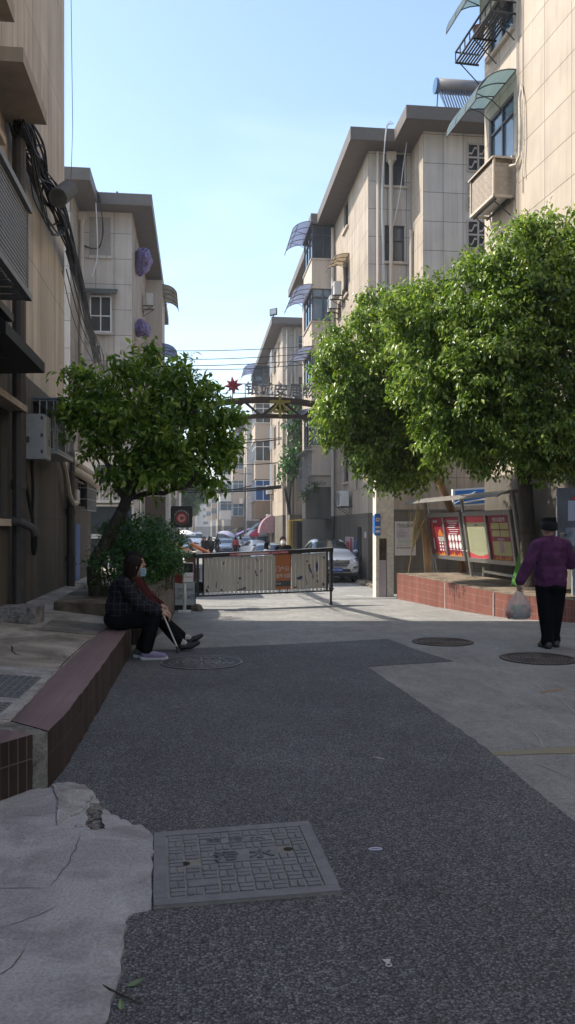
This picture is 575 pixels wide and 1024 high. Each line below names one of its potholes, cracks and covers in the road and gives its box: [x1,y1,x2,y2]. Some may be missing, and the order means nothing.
manhole cover [153,821,342,909]
pothole [74,803,105,830]
manhole cover [499,652,575,665]
manhole cover [160,655,243,670]
manhole cover [412,637,474,647]
